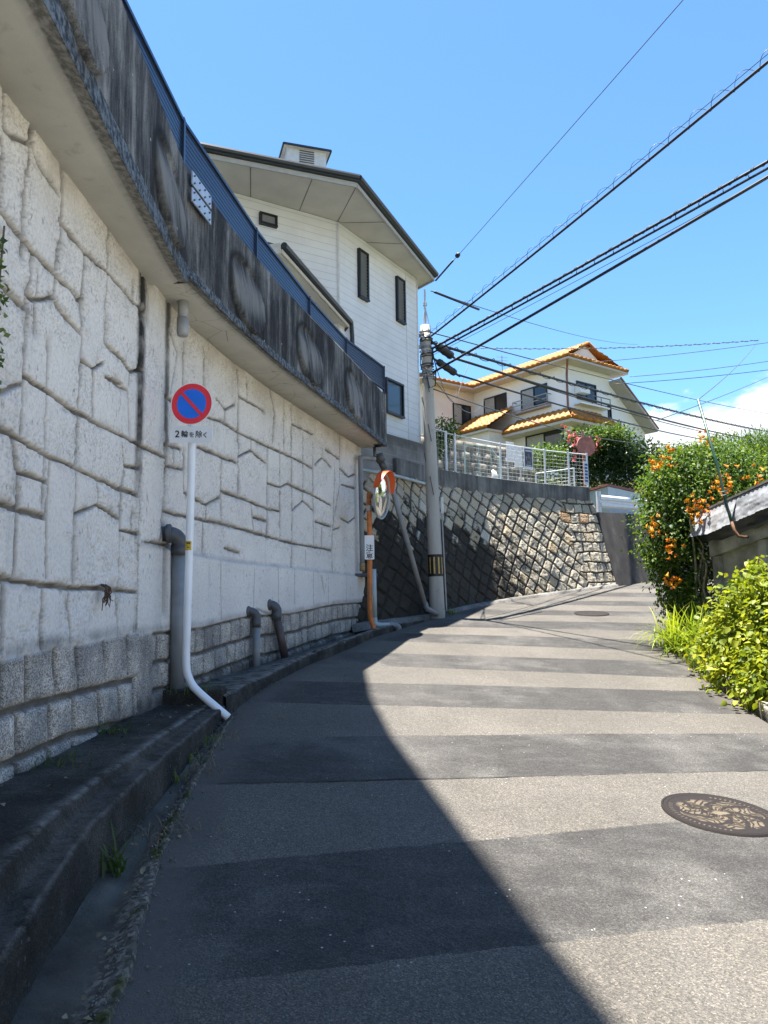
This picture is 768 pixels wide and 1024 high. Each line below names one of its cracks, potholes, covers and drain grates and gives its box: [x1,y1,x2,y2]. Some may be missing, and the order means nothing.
manhole cover [661,793,768,838]
